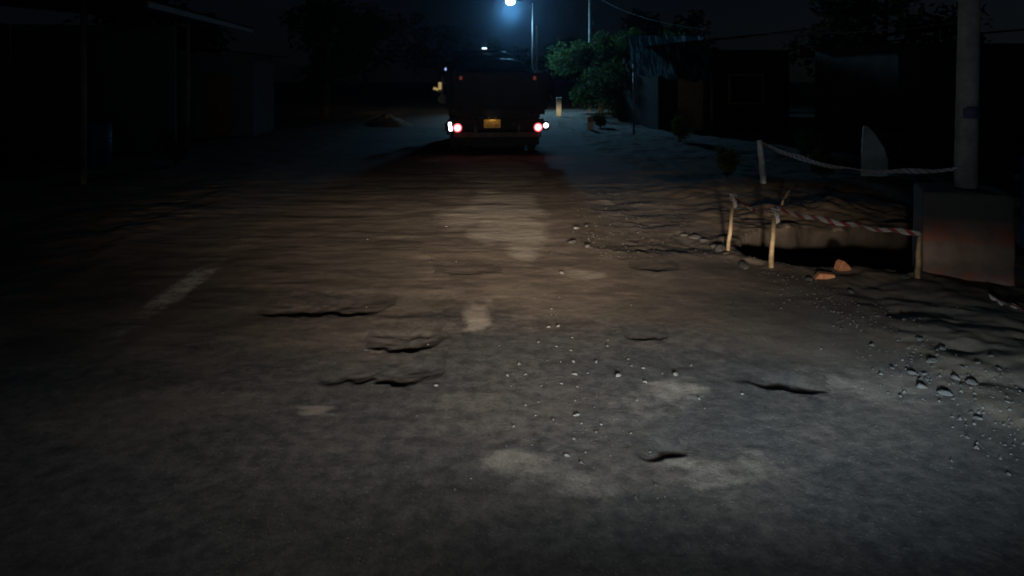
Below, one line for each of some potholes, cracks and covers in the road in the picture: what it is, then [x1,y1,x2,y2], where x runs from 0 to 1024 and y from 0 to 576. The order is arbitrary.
pothole [313,349,449,387]
pothole [628,260,682,272]
pothole [730,365,831,395]
pothole [620,324,671,341]
pothole [630,434,691,462]
pothole [364,323,446,353]
pothole [255,292,399,318]
